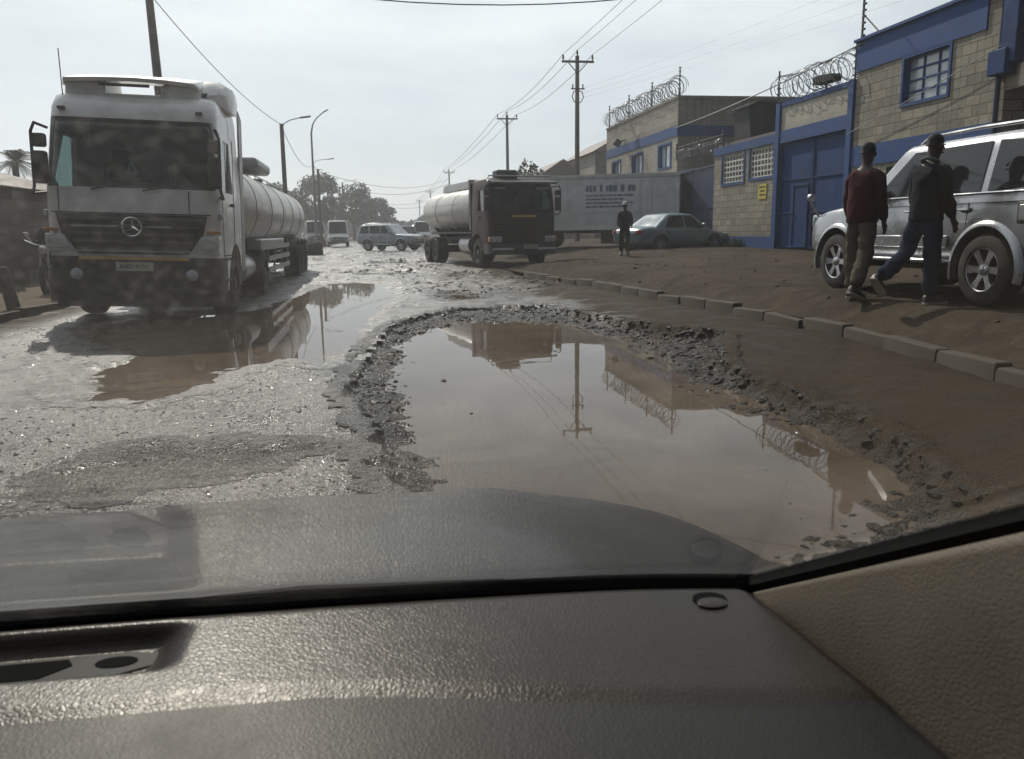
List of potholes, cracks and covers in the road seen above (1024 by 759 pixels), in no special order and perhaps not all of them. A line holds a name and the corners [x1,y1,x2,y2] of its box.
pothole [23,280,417,410]
pothole [321,304,1024,567]
